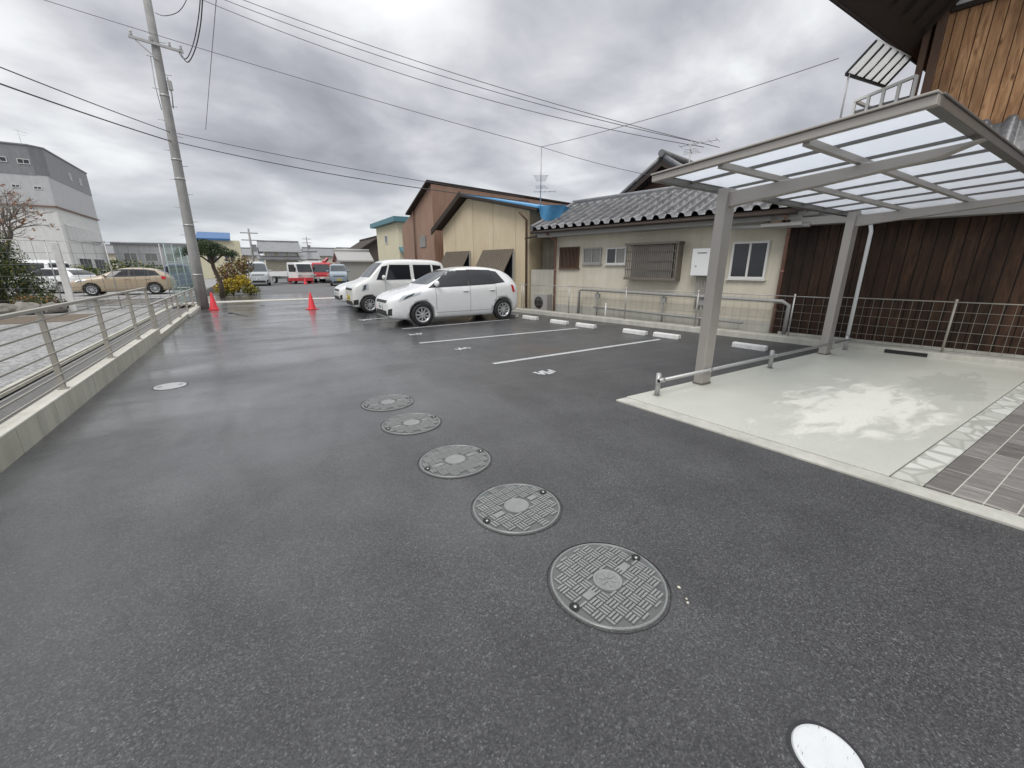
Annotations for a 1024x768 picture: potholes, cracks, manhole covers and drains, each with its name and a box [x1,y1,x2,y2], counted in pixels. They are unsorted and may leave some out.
manhole cover [381,413,442,435]
manhole cover [546,542,671,634]
manhole cover [471,483,563,536]
manhole cover [361,395,413,412]
manhole cover [417,445,492,479]
